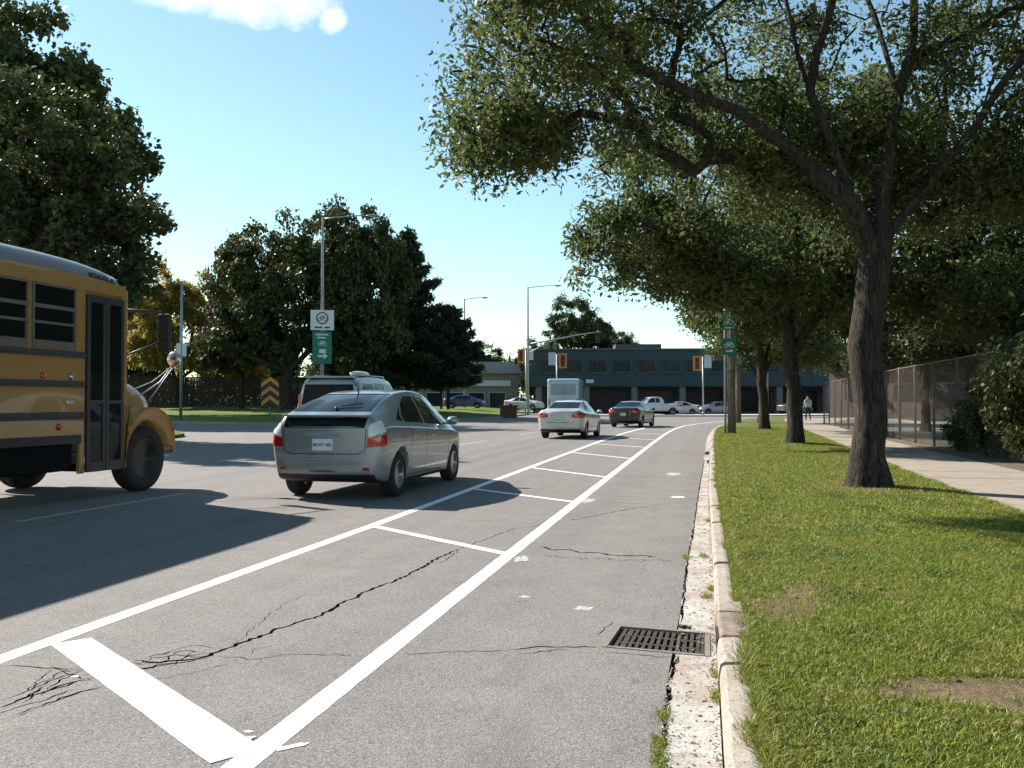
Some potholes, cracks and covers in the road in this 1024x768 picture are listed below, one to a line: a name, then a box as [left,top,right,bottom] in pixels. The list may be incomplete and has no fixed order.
drain grate [601,625,711,681]
crack [133,521,560,679]
crack [0,665,103,719]
crack [544,547,671,562]
crack [404,622,675,660]
